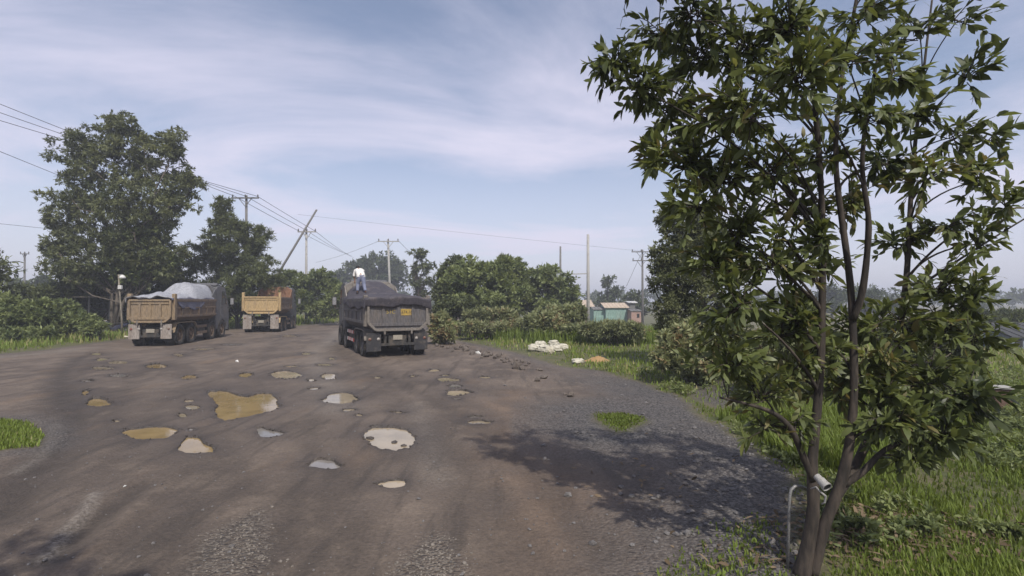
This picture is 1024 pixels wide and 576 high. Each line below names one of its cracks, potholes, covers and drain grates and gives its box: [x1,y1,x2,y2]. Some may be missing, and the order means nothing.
pothole [362,424,418,451]
pothole [306,456,345,469]
pothole [268,369,303,380]
pothole [206,389,285,421]
pothole [256,425,285,438]
pothole [320,392,360,404]
pothole [120,425,183,440]
pothole [177,435,217,453]
pothole [84,395,114,406]
pothole [445,388,474,396]
pothole [373,477,407,488]
